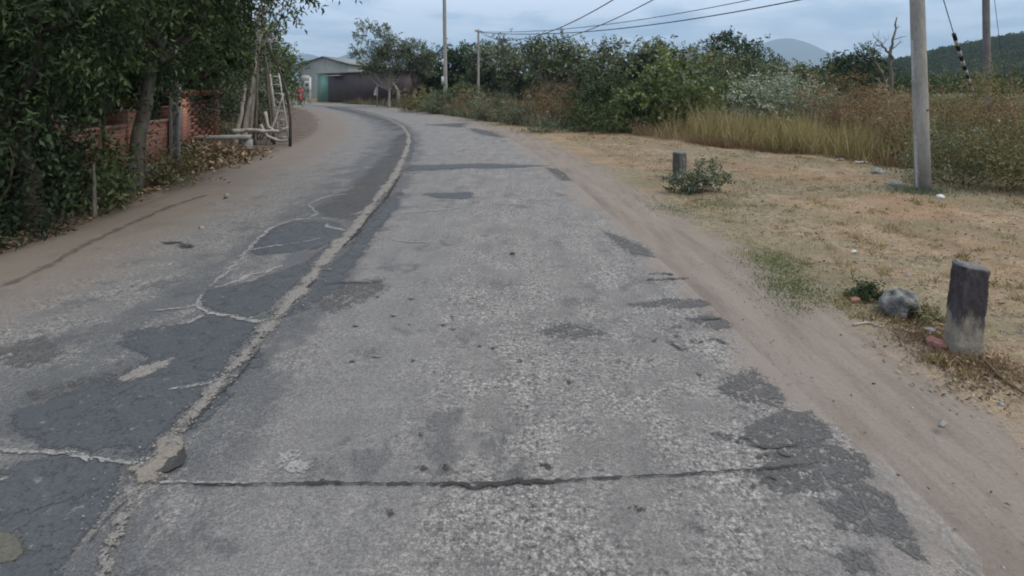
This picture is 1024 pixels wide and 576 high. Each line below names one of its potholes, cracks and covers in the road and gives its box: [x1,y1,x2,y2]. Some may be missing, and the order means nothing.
crack [168,375,238,390]
crack [155,194,362,324]
crack [0,447,248,484]
